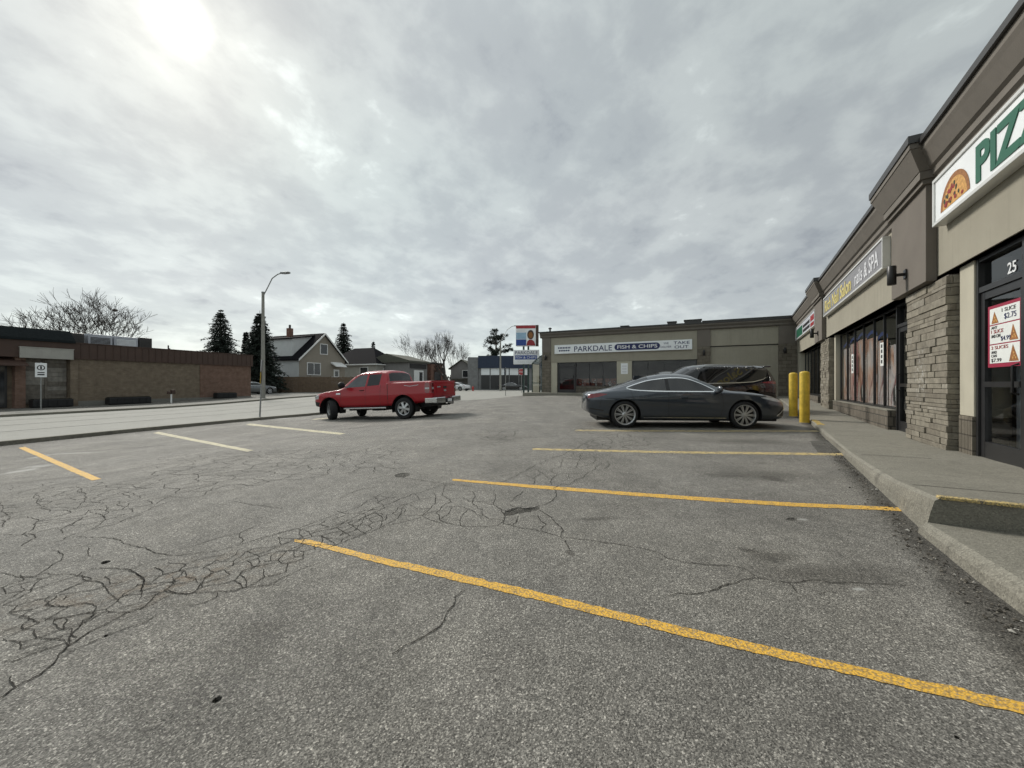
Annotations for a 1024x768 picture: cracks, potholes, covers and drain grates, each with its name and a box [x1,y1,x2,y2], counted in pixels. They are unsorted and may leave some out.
crack [392,589,466,654]
crack [0,448,893,595]
crack [503,432,657,487]
crack [0,485,442,698]
pothole [503,506,540,516]
